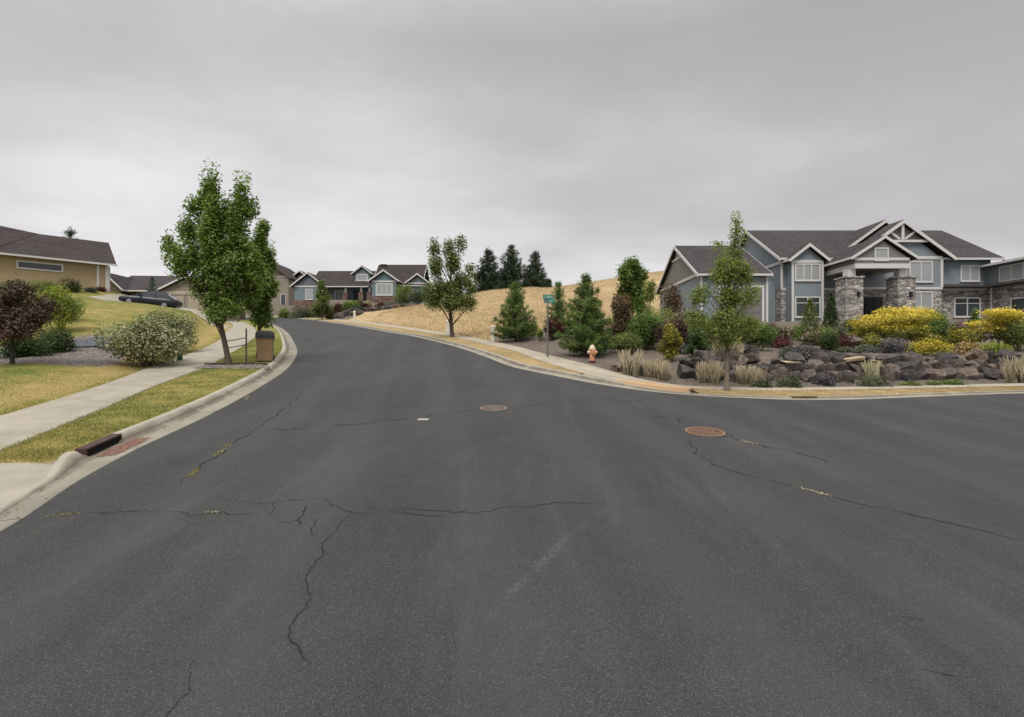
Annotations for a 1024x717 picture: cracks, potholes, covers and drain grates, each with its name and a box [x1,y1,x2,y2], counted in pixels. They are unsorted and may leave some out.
crack [167,658,197,715]
crack [103,497,601,664]
crack [689,442,1013,539]
drain grate [74,434,122,456]
manhole cover [680,427,731,438]
crack [180,391,472,484]
